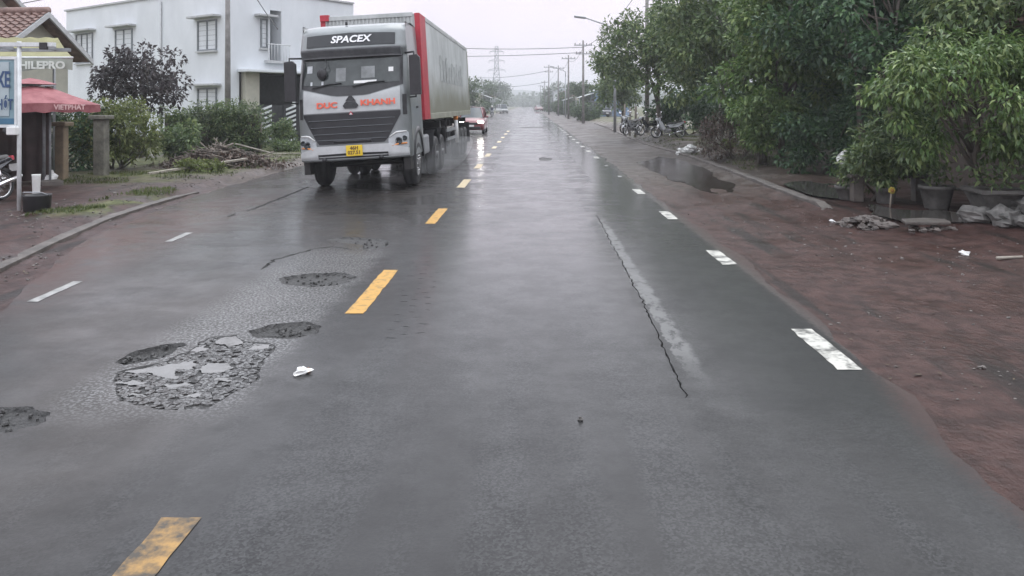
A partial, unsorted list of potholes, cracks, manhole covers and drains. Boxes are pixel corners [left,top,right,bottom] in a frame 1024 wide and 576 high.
pothole [329,237,392,250]
crack [262,246,352,269]
pothole [279,272,358,287]
crack [596,215,688,398]
pothole [115,343,187,365]
crack [227,187,309,217]
pothole [0,406,50,433]
pothole [249,321,322,339]
